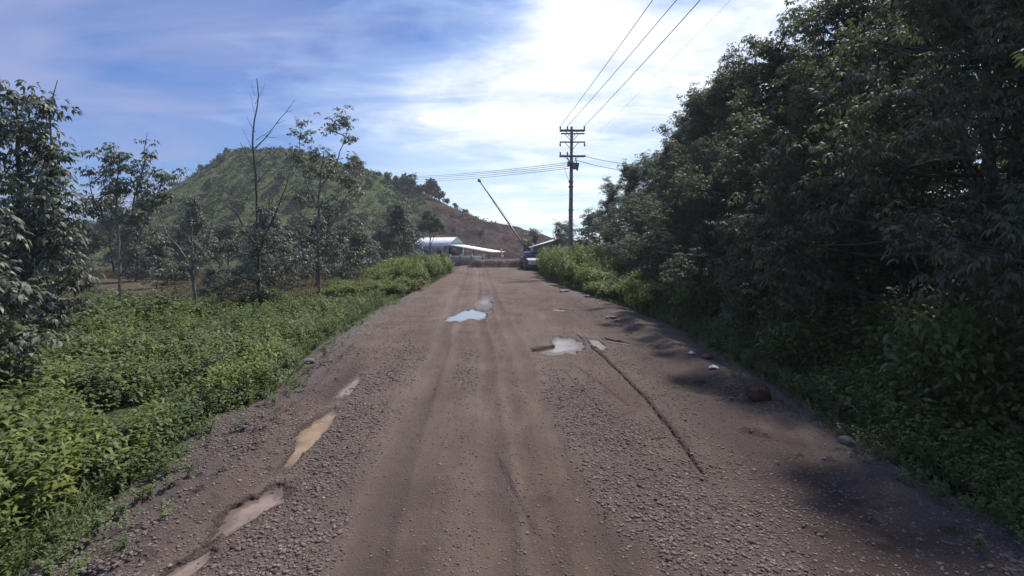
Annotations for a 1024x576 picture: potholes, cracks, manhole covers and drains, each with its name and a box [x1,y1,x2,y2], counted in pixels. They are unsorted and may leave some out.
pothole [530,334,591,358]
pothole [331,371,367,402]
pothole [586,337,609,353]
pothole [472,295,495,311]
crack [577,335,705,475]
pothole [158,533,225,576]
pothole [272,404,345,477]
pothole [189,479,302,562]
pothole [439,307,493,323]
